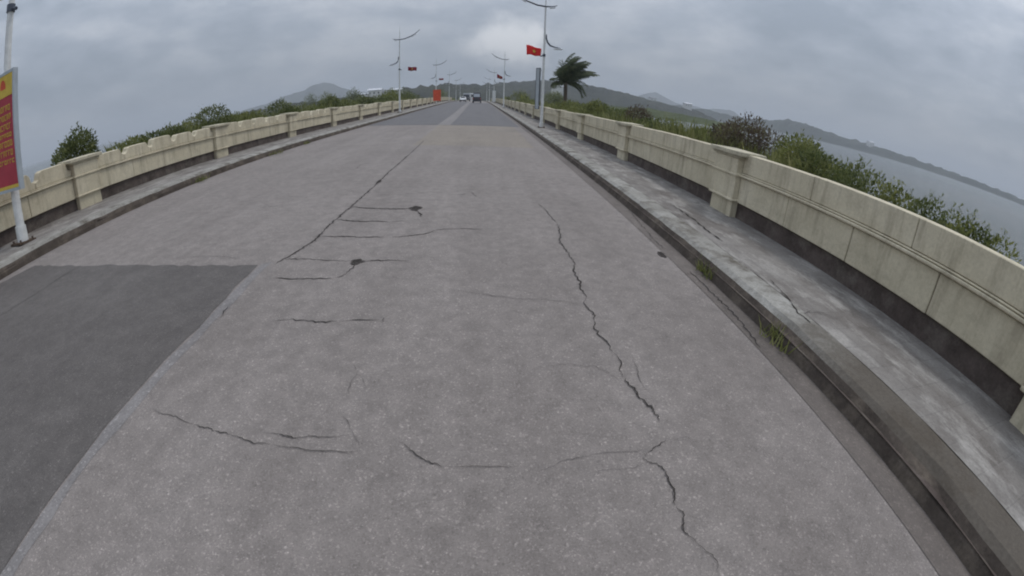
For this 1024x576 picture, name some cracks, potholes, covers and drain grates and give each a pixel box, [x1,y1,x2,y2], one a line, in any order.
crack [157,411,359,452]
crack [406,446,519,467]
crack [461,205,660,420]
crack [276,142,471,279]
crack [546,437,719,572]
